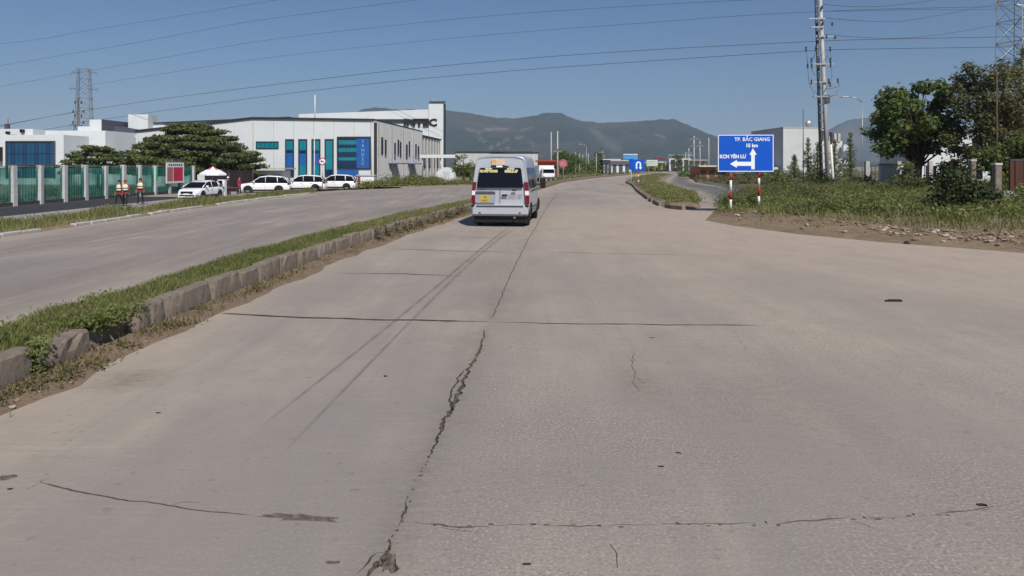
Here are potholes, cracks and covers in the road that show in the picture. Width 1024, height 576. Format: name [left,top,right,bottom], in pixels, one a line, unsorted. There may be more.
crack [223,198,760,576]
crack [28,481,247,515]
crack [417,506,994,568]
